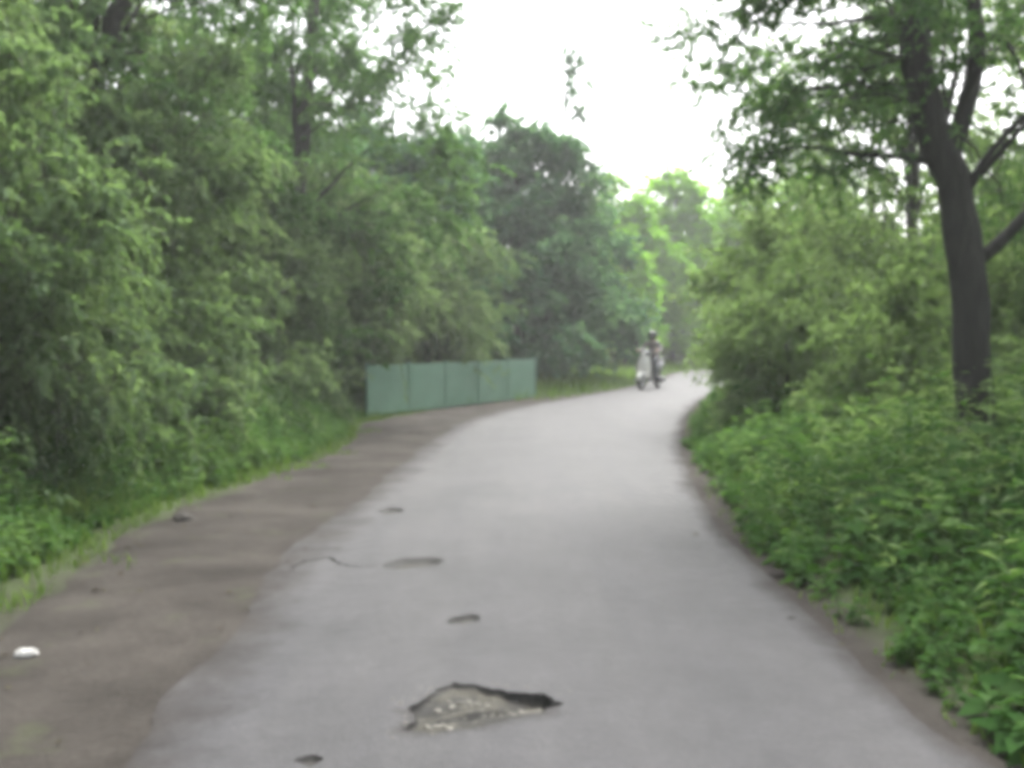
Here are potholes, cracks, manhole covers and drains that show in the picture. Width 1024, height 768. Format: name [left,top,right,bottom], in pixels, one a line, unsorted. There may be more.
pothole [293,755,323,767]
pothole [387,680,571,739]
pothole [383,557,445,569]
crack [288,557,378,573]
pothole [447,614,480,624]
